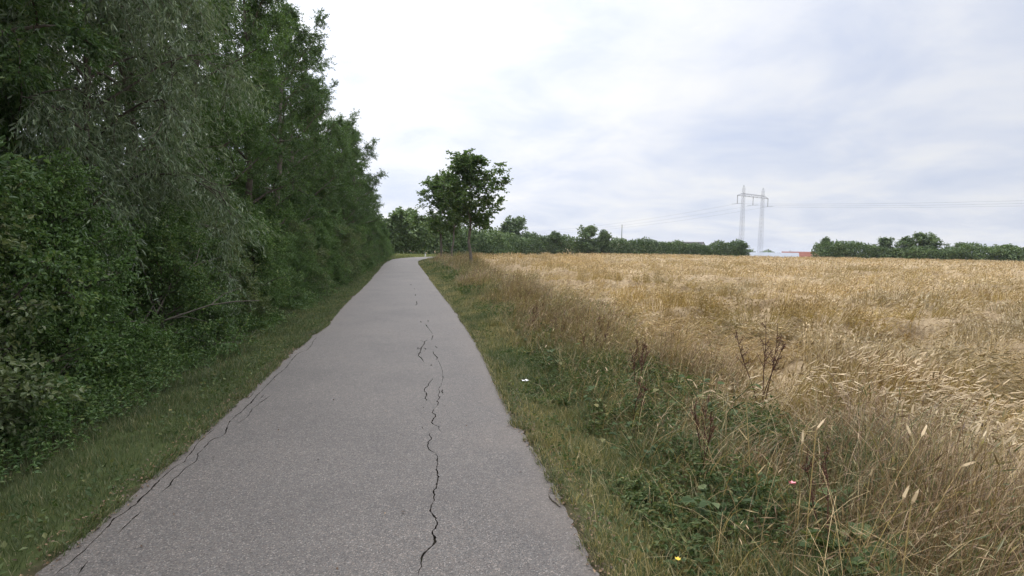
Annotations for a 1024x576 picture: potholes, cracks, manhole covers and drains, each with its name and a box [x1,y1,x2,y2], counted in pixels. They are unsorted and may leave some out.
crack [414,288,443,574]
crack [56,338,316,574]
